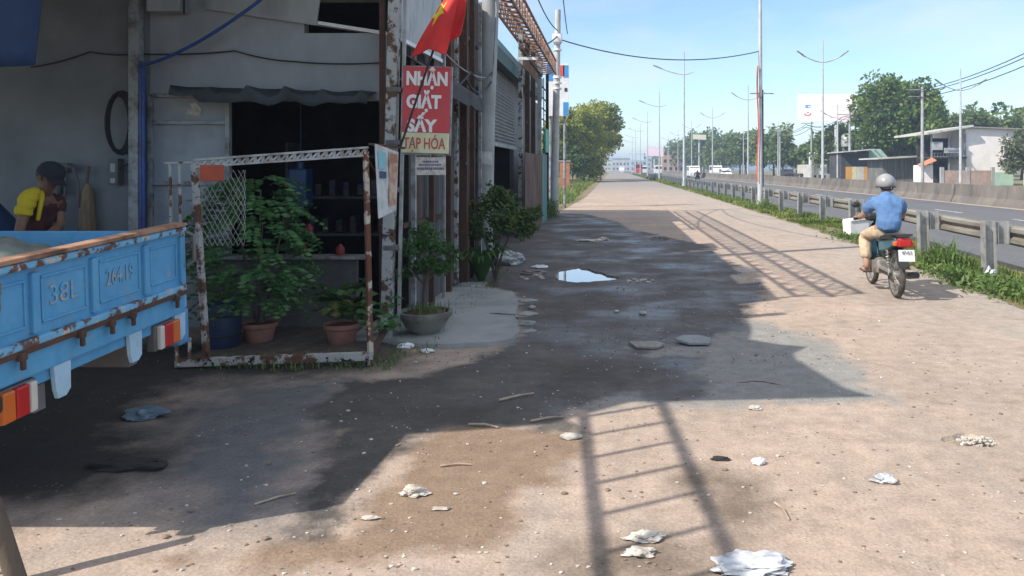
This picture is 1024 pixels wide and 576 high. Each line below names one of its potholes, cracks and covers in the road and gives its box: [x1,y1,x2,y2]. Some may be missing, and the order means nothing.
pothole [941,433,1000,448]
